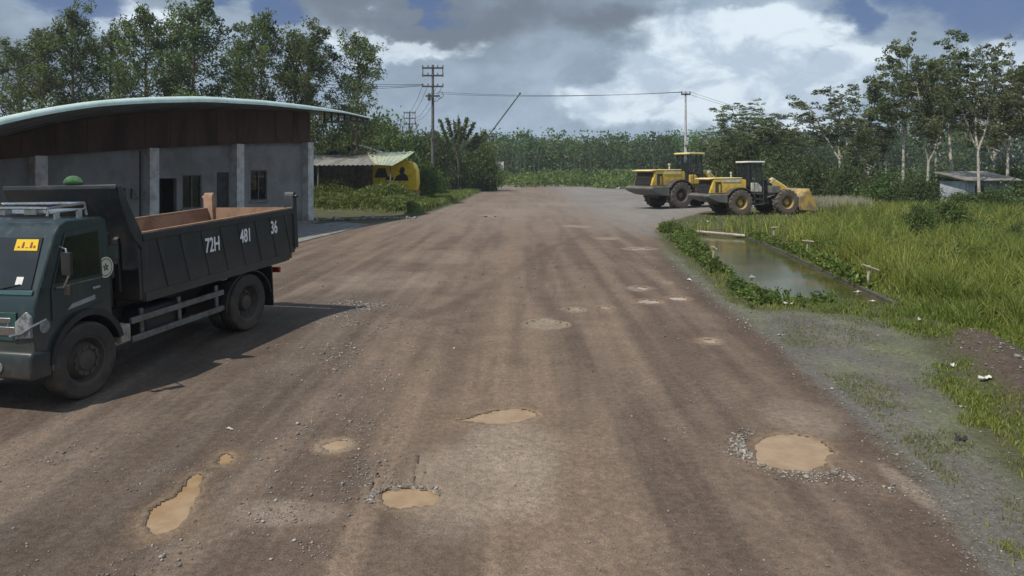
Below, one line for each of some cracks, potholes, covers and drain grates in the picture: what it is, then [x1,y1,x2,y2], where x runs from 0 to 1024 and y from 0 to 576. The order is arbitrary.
pothole [556,306,591,314]
pothole [314,437,357,455]
crack [362,453,428,494]
pothole [694,337,726,345]
pothole [134,471,213,539]
pothole [208,450,242,468]
pothole [370,483,449,513]
pothole [517,318,576,331]
pothole [745,431,844,475]
pothole [448,406,545,427]
